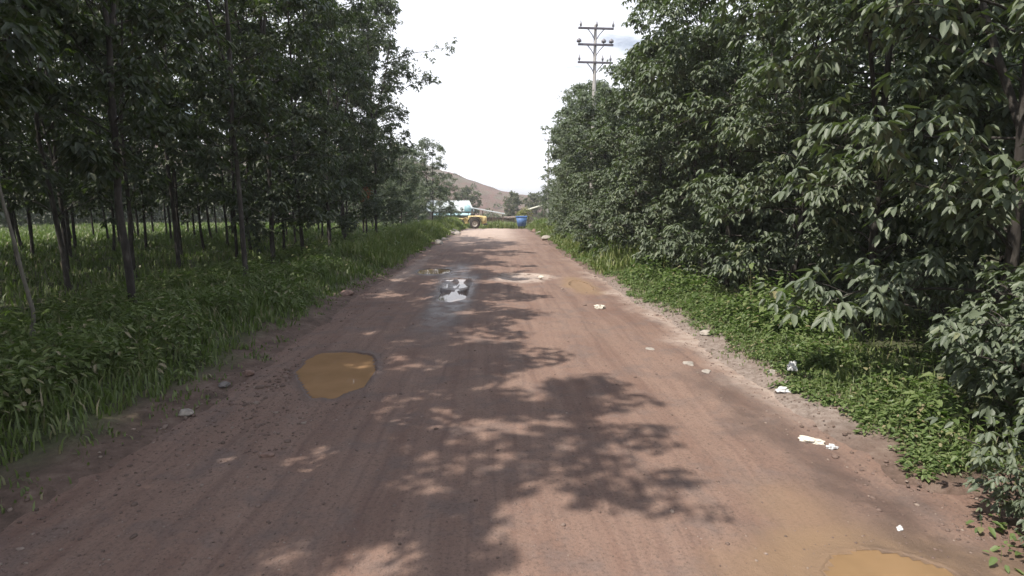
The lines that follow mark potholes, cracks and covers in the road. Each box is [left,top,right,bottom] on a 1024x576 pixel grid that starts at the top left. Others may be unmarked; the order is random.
pothole [809,544,968,576]
pothole [289,349,383,405]
pothole [434,277,475,305]
pothole [567,280,597,294]
